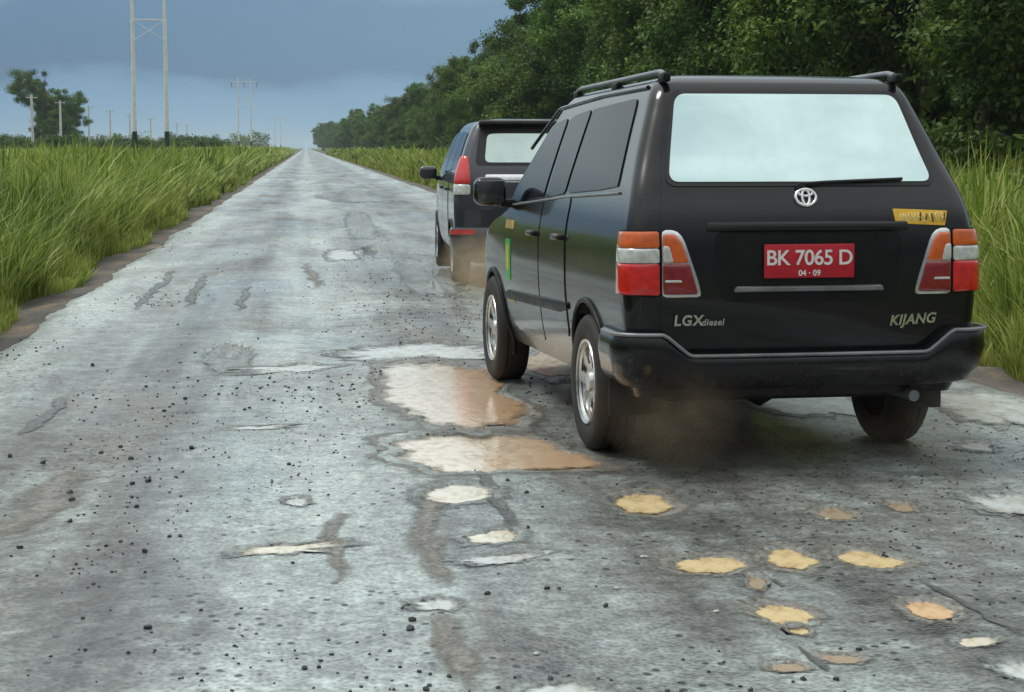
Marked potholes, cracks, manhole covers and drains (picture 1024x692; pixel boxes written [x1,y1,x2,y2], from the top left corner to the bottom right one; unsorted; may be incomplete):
pothole [945,632,1007,648]
pothole [407,479,513,508]
pothole [448,523,532,547]
pothole [751,540,837,576]
pothole [363,428,631,477]
crack [920,580,1022,634]
pothole [735,596,830,628]
pothole [880,497,921,513]
pothole [653,550,765,577]
pothole [596,486,691,519]
pothole [891,594,970,625]
pothole [198,343,257,375]
